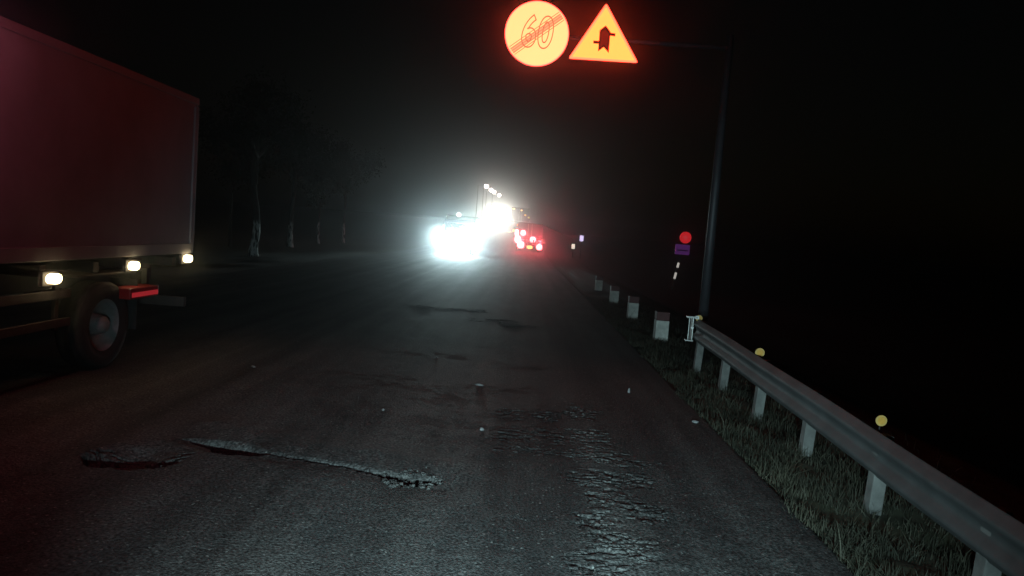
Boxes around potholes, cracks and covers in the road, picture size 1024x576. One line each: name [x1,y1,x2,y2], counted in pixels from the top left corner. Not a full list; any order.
crack [478,403,676,576]
pothole [76,439,211,471]
